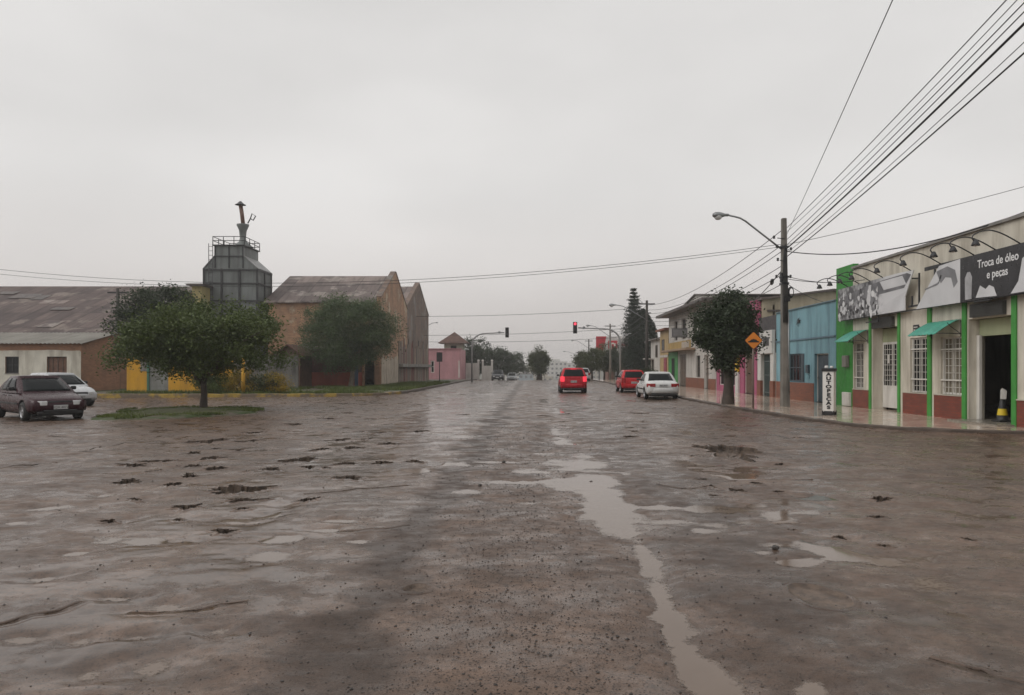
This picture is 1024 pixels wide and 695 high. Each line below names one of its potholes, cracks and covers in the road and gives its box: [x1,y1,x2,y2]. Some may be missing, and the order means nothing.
pothole [689,444,768,463]
pothole [164,503,208,512]
pothole [202,484,282,496]
pothole [104,478,147,486]
crack [0,600,93,628]
pothole [865,496,899,504]
pothole [205,528,245,537]
